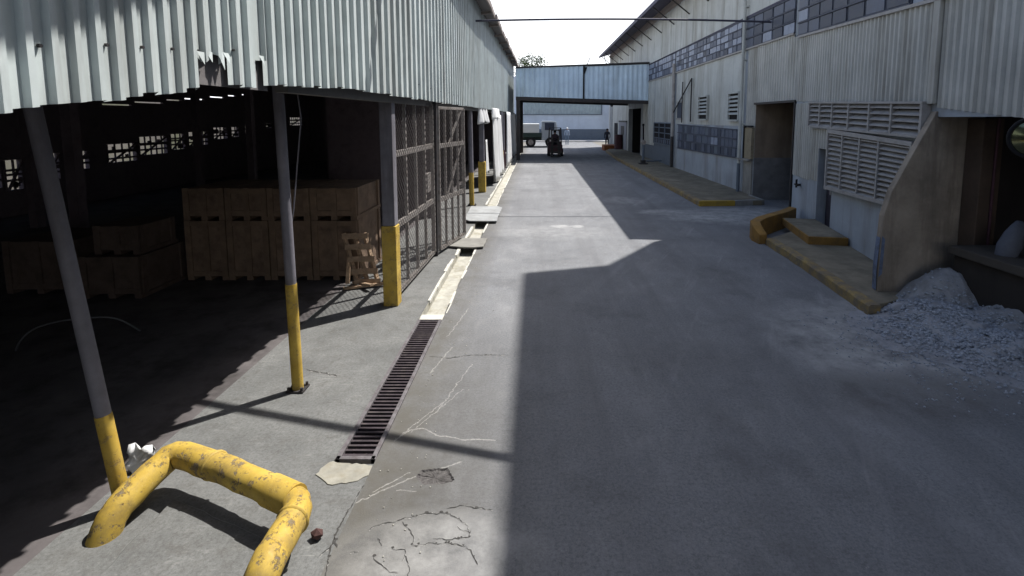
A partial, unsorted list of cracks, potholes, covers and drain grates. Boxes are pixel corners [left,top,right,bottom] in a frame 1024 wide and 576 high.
pothole [416,467,455,485]
crack [321,486,363,576]
drain grate [335,319,442,464]
crack [350,505,493,575]
